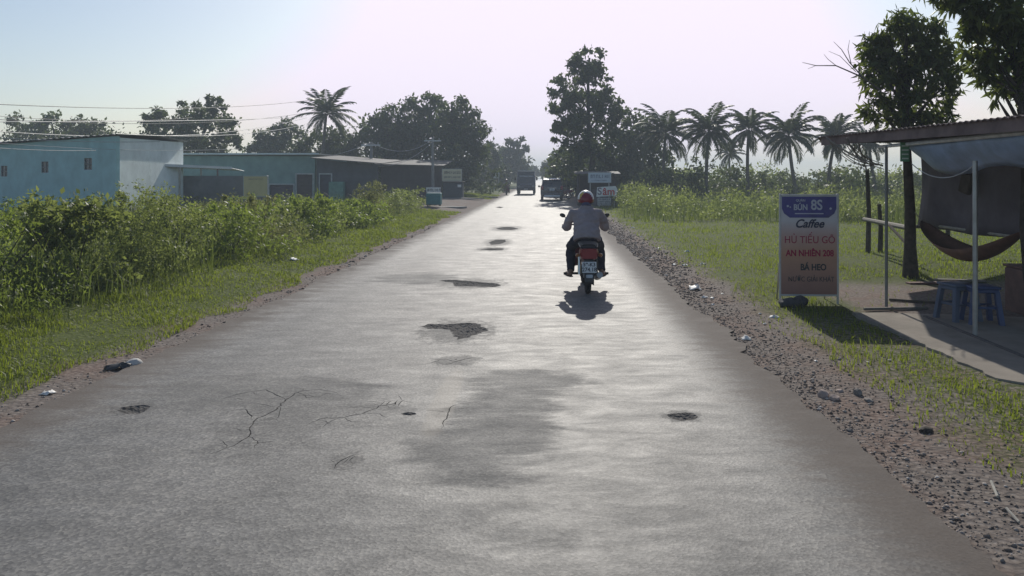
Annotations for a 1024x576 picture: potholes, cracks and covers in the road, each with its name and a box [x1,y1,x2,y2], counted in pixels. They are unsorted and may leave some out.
crack [309,396,406,428]
crack [220,388,333,451]
pothole [421,323,488,340]
pothole [117,405,150,414]
pothole [667,412,698,421]
